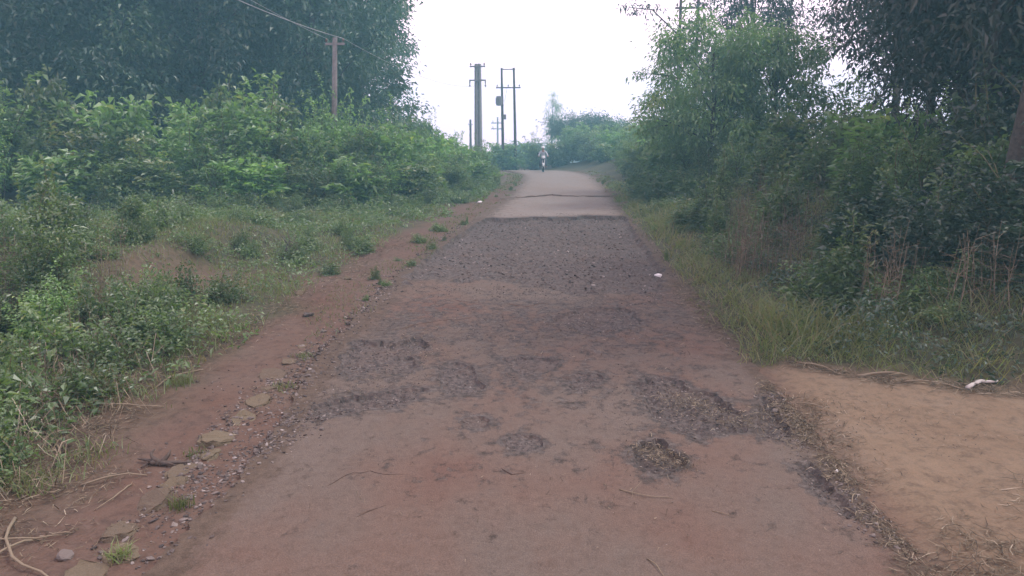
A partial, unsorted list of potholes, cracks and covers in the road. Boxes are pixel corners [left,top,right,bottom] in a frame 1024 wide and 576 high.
pothole [562,373,603,392]
pothole [311,387,429,419]
pothole [633,438,688,475]
pothole [437,362,486,396]
pothole [631,375,748,440]
pothole [501,357,561,378]
pothole [502,434,543,452]
pothole [460,416,490,428]
pothole [336,337,429,379]
pothole [756,395,793,439]
